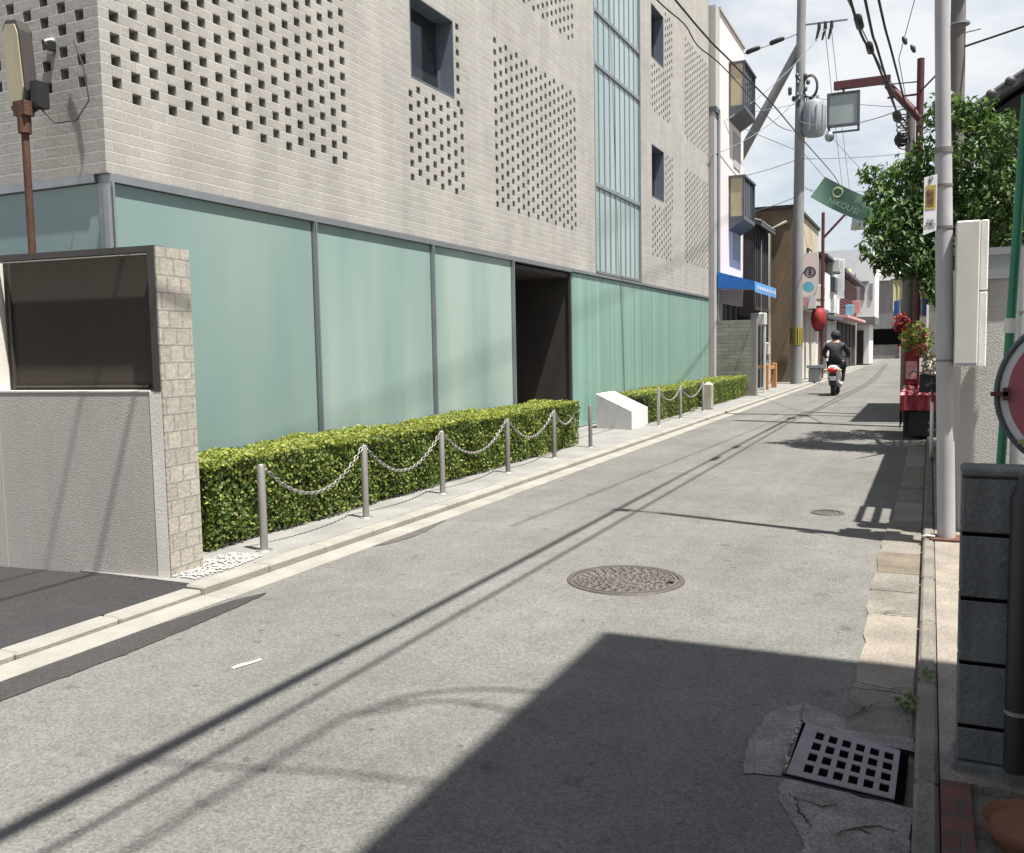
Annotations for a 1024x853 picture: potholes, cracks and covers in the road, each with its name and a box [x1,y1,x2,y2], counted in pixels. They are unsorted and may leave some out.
manhole cover [567,565,685,595]
crack [836,825,898,834]
crack [789,792,833,827]
drain grate [782,722,909,804]
crack [846,681,913,718]
